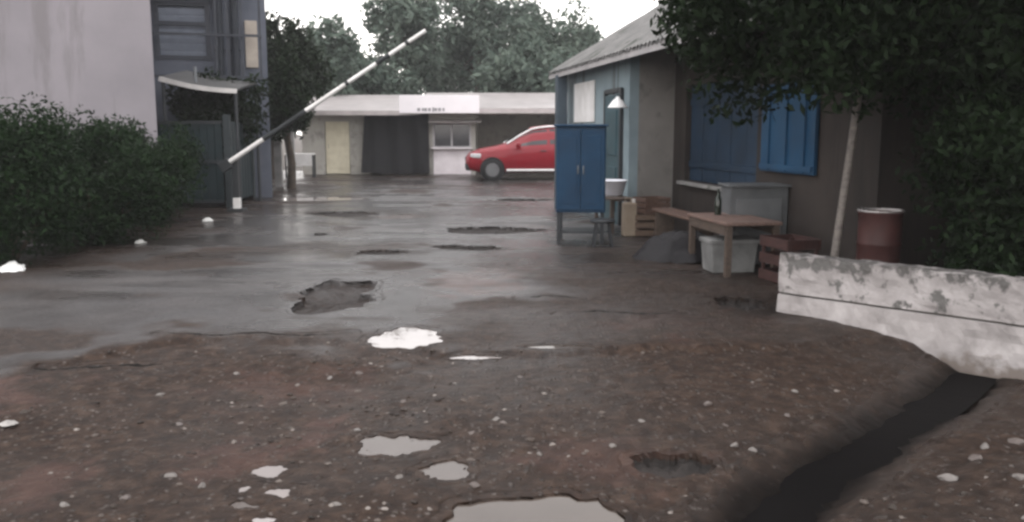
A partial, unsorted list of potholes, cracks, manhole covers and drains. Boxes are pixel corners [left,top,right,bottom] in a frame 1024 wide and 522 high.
pothole [618,448,732,482]
pothole [707,295,777,312]
pothole [298,210,389,218]
pothole [406,455,481,486]
pothole [429,488,637,522]
pothole [425,244,508,252]
pothole [285,278,383,316]
pothole [440,225,553,235]
pothole [347,431,452,460]
pothole [358,325,450,351]
pothole [350,248,417,256]
